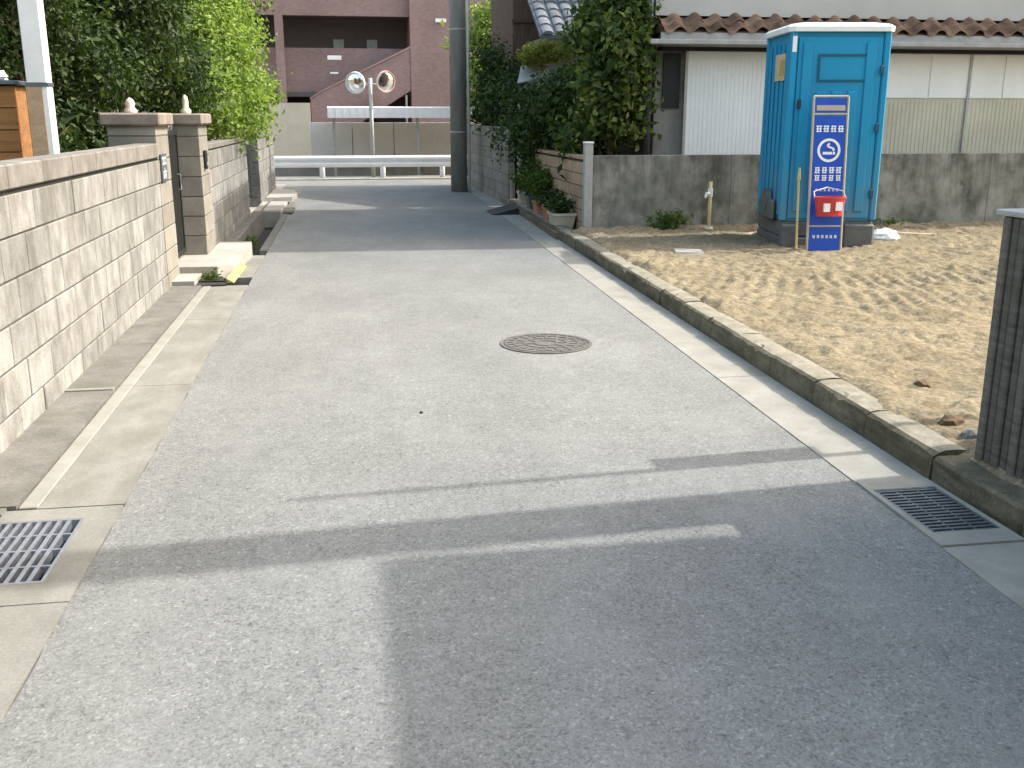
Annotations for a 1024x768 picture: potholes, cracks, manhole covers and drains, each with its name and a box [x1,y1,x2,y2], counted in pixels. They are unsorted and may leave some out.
manhole cover [500,333,592,354]
drain grate [873,486,1000,533]
drain grate [0,518,84,585]
